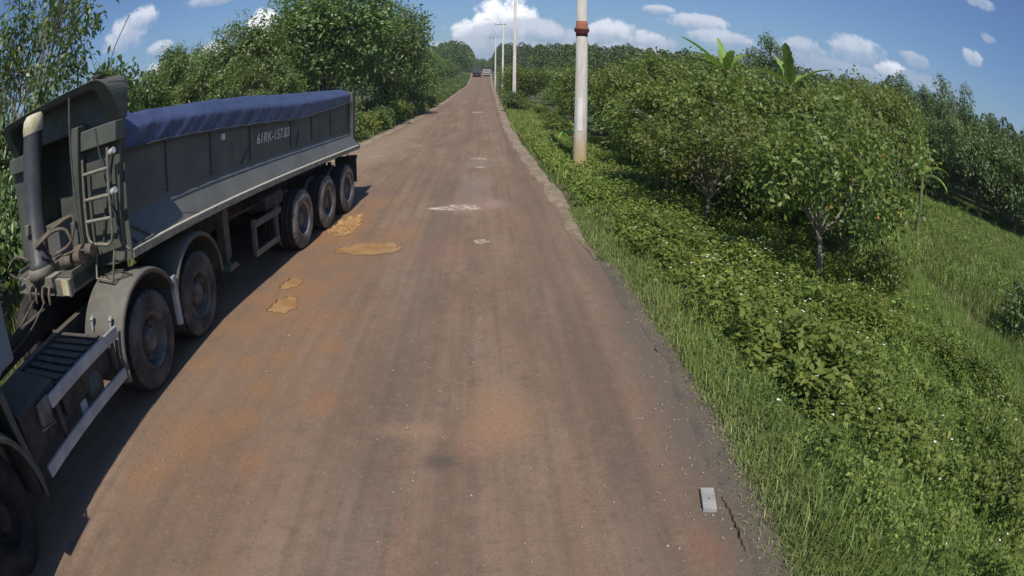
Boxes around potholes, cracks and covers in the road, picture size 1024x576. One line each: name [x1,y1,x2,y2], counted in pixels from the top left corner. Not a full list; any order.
crack [721,497,746,552]
